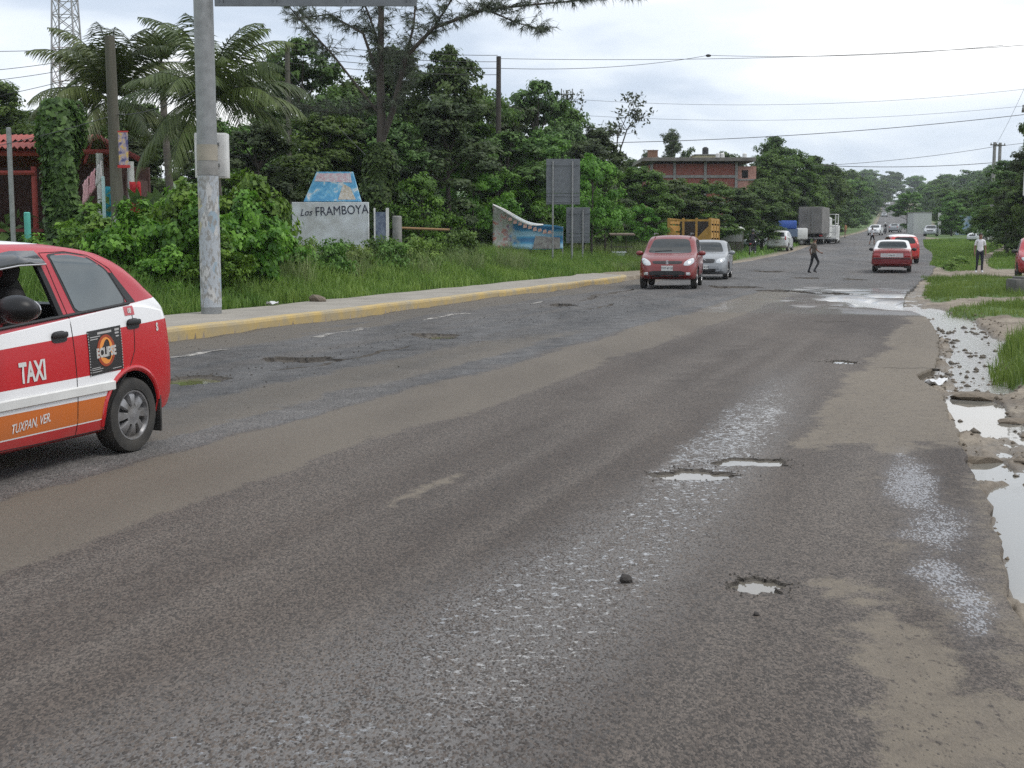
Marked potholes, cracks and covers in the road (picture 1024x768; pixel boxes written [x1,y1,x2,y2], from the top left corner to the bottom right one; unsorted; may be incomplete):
pothole [170,373,233,387]
pothole [698,454,804,467]
pothole [646,465,761,481]
pothole [718,573,799,598]
